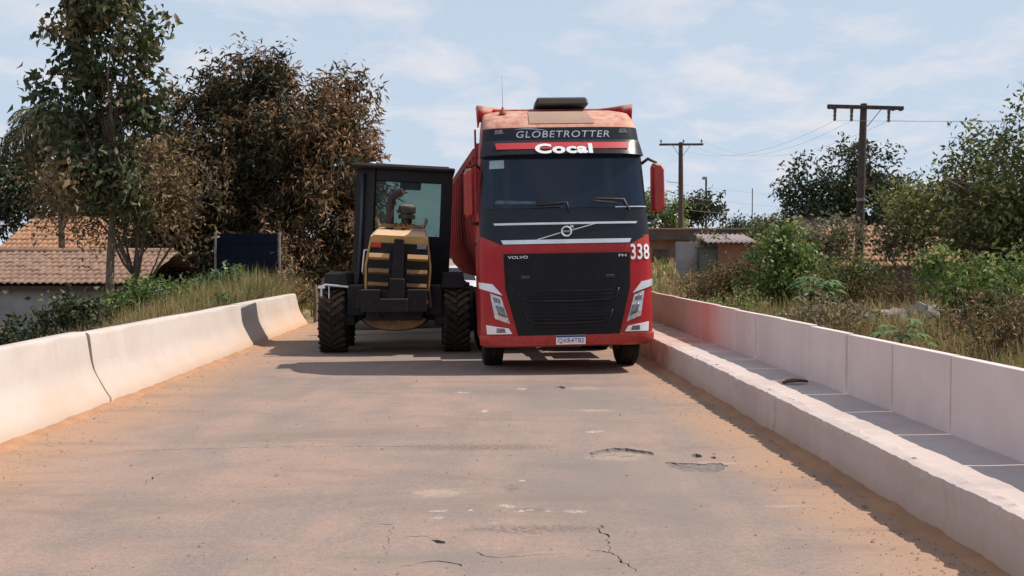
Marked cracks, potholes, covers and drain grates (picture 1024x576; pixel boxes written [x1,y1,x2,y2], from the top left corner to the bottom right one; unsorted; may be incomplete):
crack [588,525,637,572]
crack [363,523,563,567]
pothole [588,448,654,459]
pothole [665,462,728,473]
